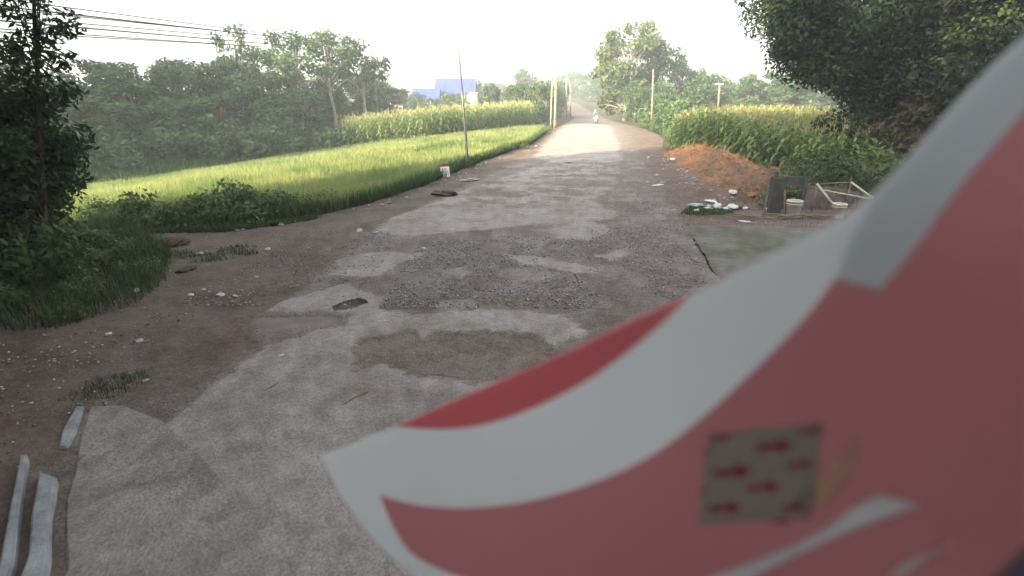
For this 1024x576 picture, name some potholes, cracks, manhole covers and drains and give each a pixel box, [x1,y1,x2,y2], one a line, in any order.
pothole [332,298,368,311]
pothole [353,330,559,381]
